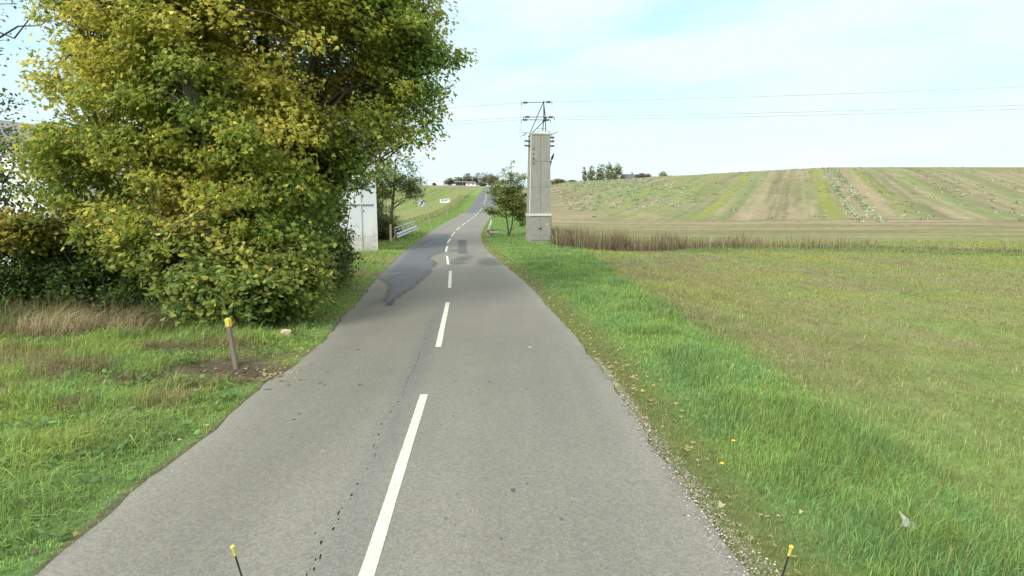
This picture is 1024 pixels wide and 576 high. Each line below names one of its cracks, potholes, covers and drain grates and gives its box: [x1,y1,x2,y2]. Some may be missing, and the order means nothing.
crack [301,338,425,576]
